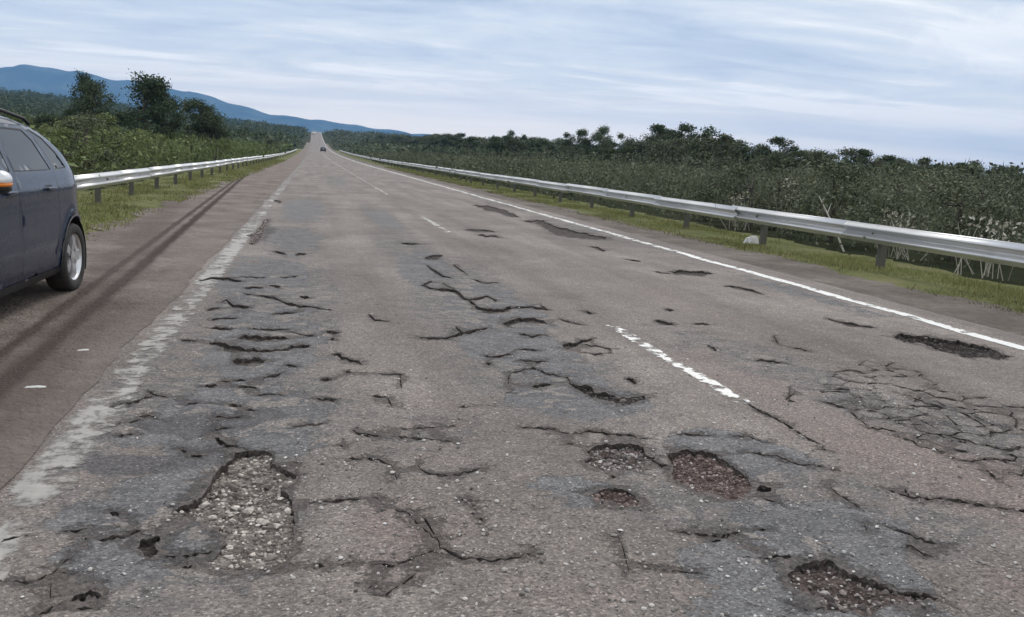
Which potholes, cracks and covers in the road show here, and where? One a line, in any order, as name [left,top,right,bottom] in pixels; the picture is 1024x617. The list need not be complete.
pothole [667,449,752,500]
crack [418,466,480,476]
crack [313,497,530,596]
crack [420,265,592,393]
crack [574,343,611,356]
pothole [894,333,1010,360]
pothole [175,450,298,570]
pothole [590,488,639,508]
crack [179,276,466,479]
pothole [526,220,606,240]
pothole [788,559,938,616]
pothole [585,443,655,472]
